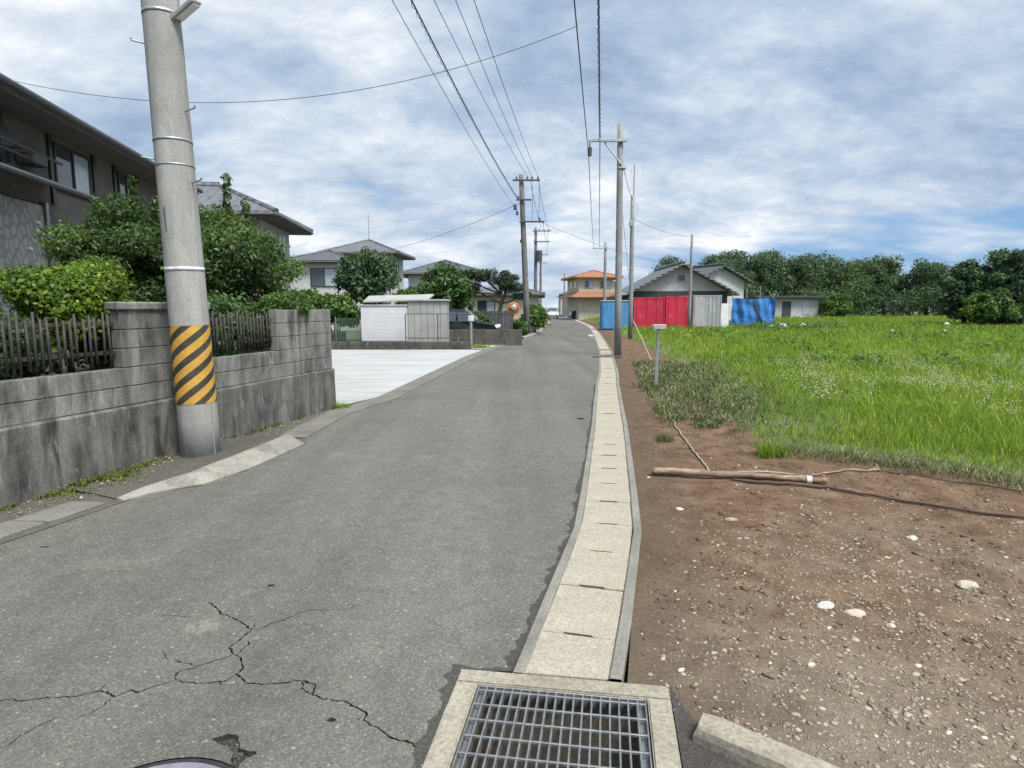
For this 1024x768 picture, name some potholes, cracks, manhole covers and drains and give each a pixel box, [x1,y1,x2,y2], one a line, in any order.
drain grate [451,685,653,768]
pothole [212,733,256,768]
crack [0,602,416,747]
manhole cover [138,758,233,768]
